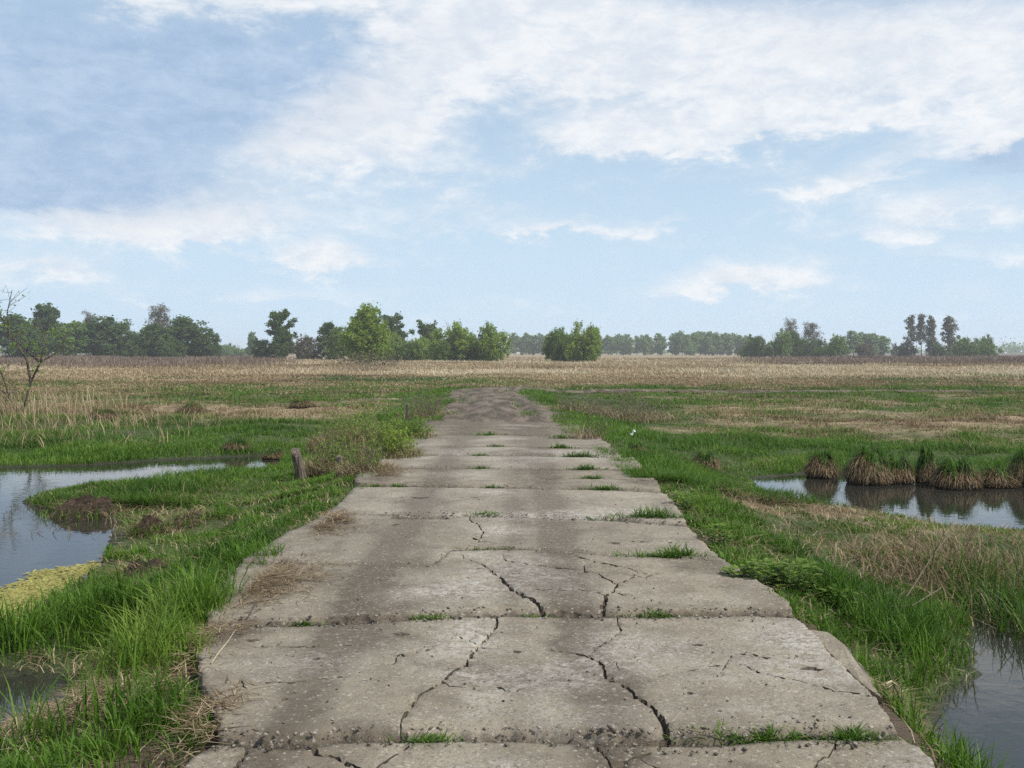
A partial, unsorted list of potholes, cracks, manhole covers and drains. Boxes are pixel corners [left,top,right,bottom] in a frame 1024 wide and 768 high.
crack [265,618,524,768]
crack [462,518,671,768]
